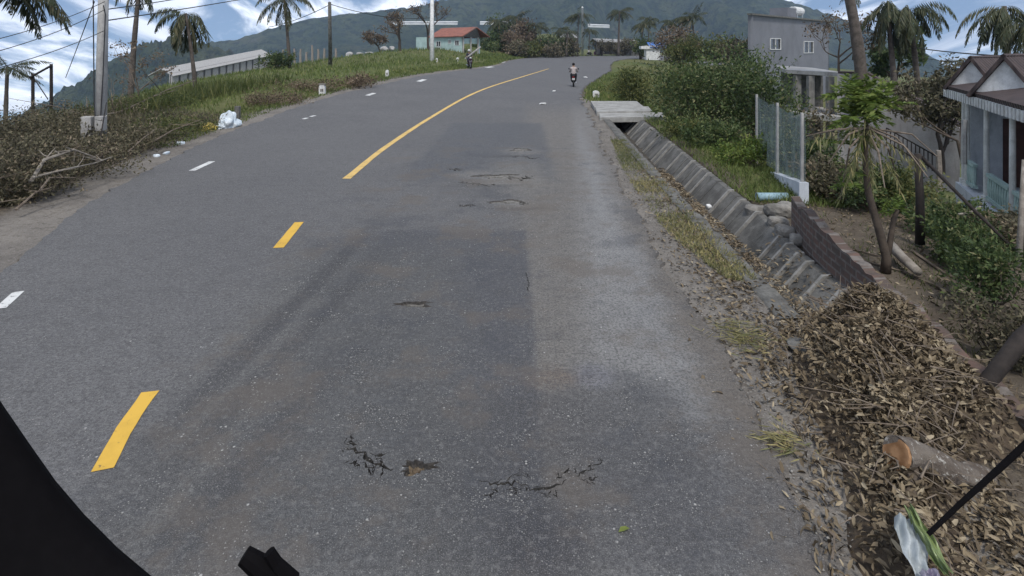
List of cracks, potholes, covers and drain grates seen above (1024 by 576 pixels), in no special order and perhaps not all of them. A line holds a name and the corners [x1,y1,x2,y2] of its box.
pothole [400,459,439,476]
crack [342,434,397,478]
crack [479,458,607,502]
